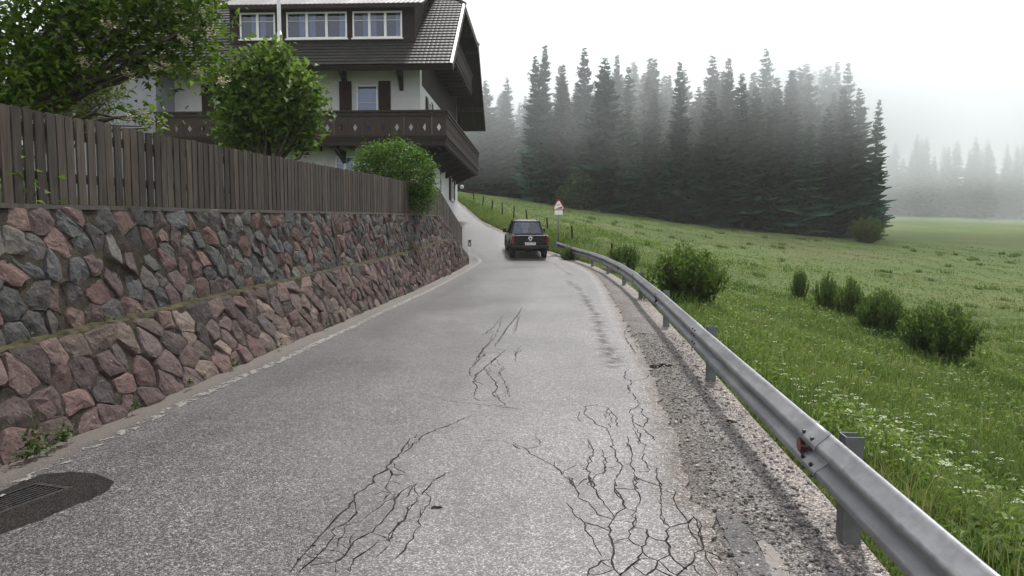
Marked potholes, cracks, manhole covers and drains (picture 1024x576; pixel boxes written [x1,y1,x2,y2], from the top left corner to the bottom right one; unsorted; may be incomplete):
drain grate [0,482,73,513]
crack [459,308,522,409]
crack [487,385,729,576]
crack [290,417,469,572]
